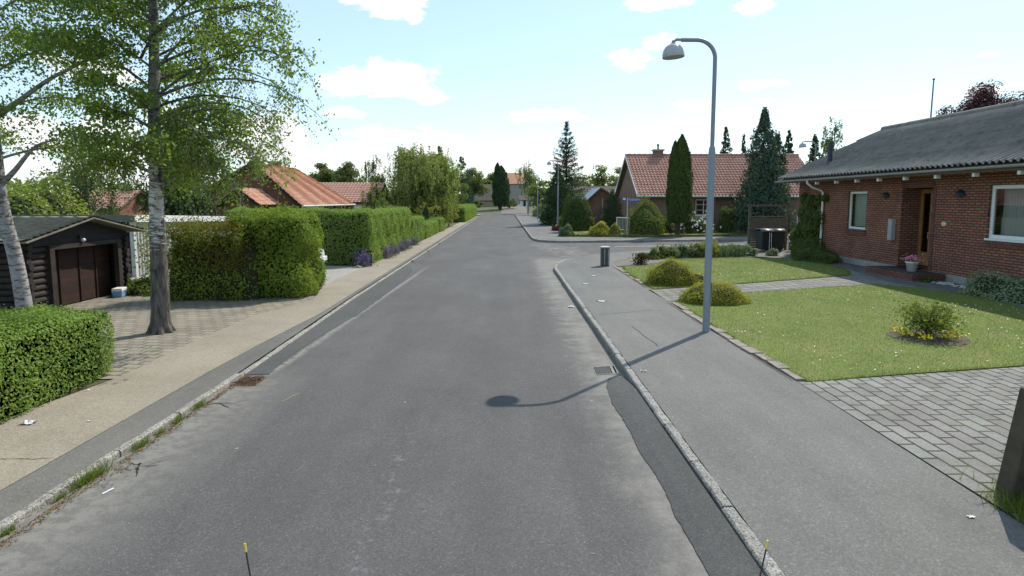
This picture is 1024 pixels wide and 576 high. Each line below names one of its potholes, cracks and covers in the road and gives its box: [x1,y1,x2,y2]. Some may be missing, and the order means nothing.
drain grate [232,377,266,386]
drain grate [592,365,618,375]
